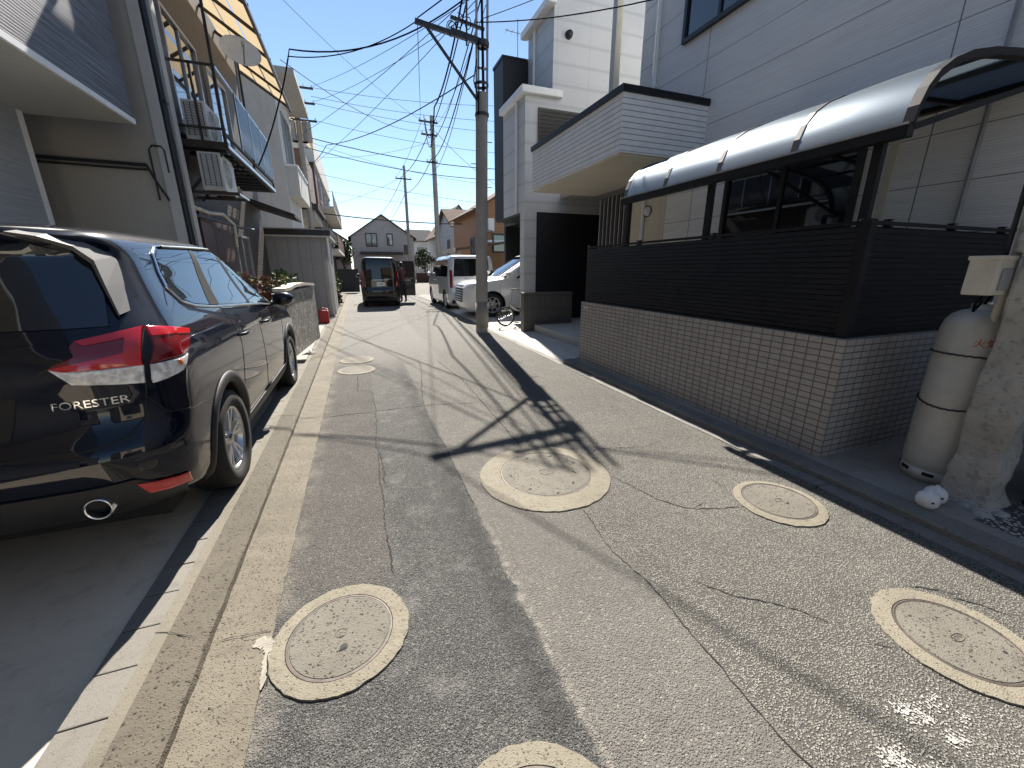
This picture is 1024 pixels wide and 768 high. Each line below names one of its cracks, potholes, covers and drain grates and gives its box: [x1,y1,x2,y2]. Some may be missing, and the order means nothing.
crack [616,478,738,509]
manhole cover [733,481,829,528]
crack [583,509,814,768]
manhole cover [337,366,376,375]
manhole cover [480,446,611,513]
manhole cover [268,584,409,702]
manhole cover [340,356,374,364]
manhole cover [870,588,1024,708]
manhole cover [478,741,599,768]
